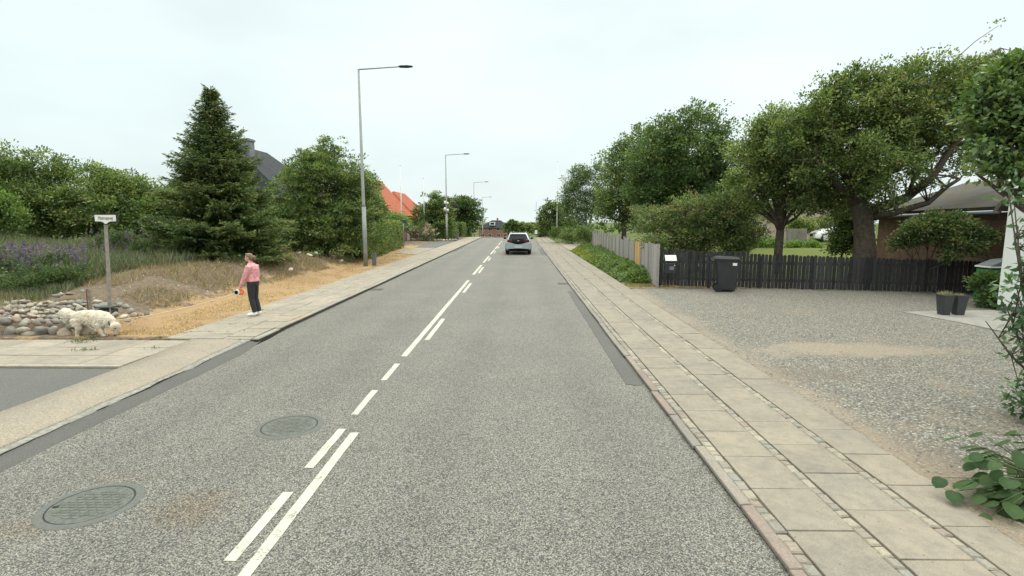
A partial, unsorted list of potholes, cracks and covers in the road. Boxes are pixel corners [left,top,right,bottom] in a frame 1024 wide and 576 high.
manhole cover [254,414,324,439]
manhole cover [31,482,145,530]
